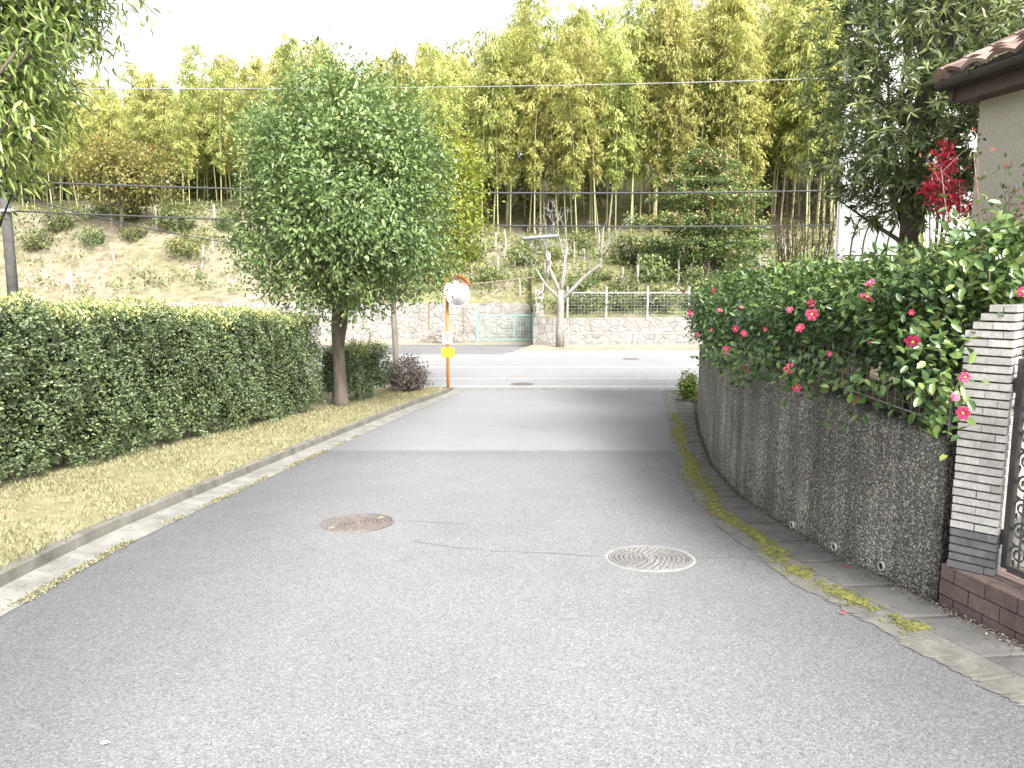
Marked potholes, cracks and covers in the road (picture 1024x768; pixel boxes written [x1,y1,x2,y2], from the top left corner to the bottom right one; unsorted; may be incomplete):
manhole cover [604,545,696,572]
manhole cover [319,513,394,533]
